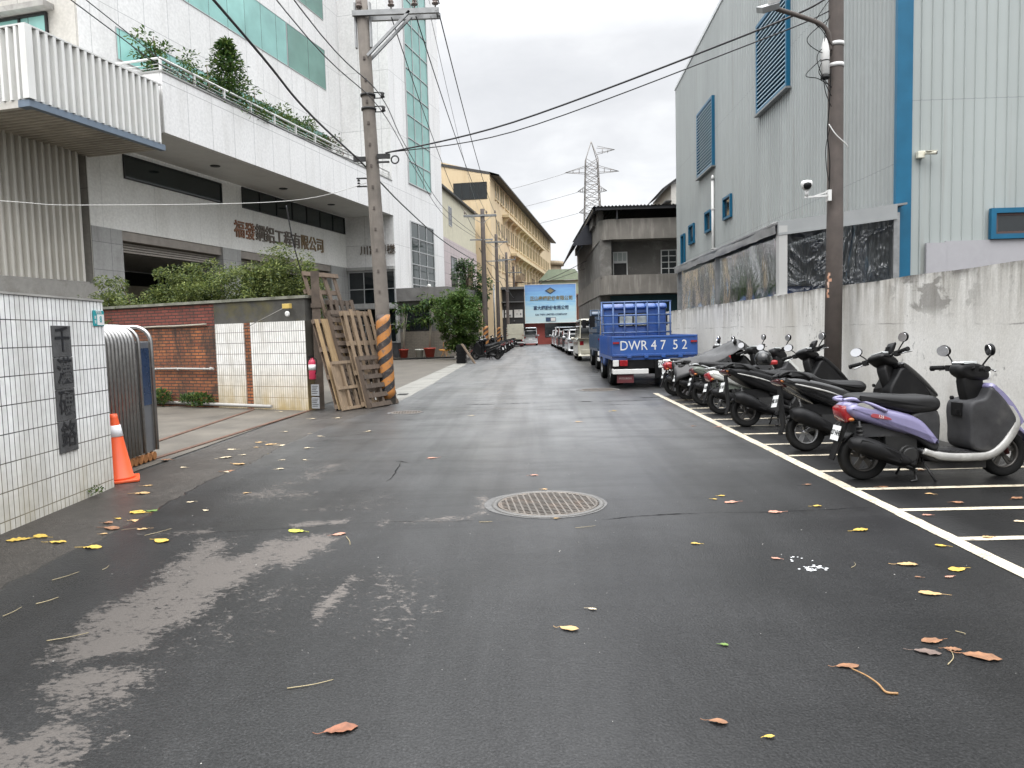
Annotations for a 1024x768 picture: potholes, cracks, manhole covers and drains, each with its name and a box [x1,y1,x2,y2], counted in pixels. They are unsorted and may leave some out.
manhole cover [484,490,607,519]
